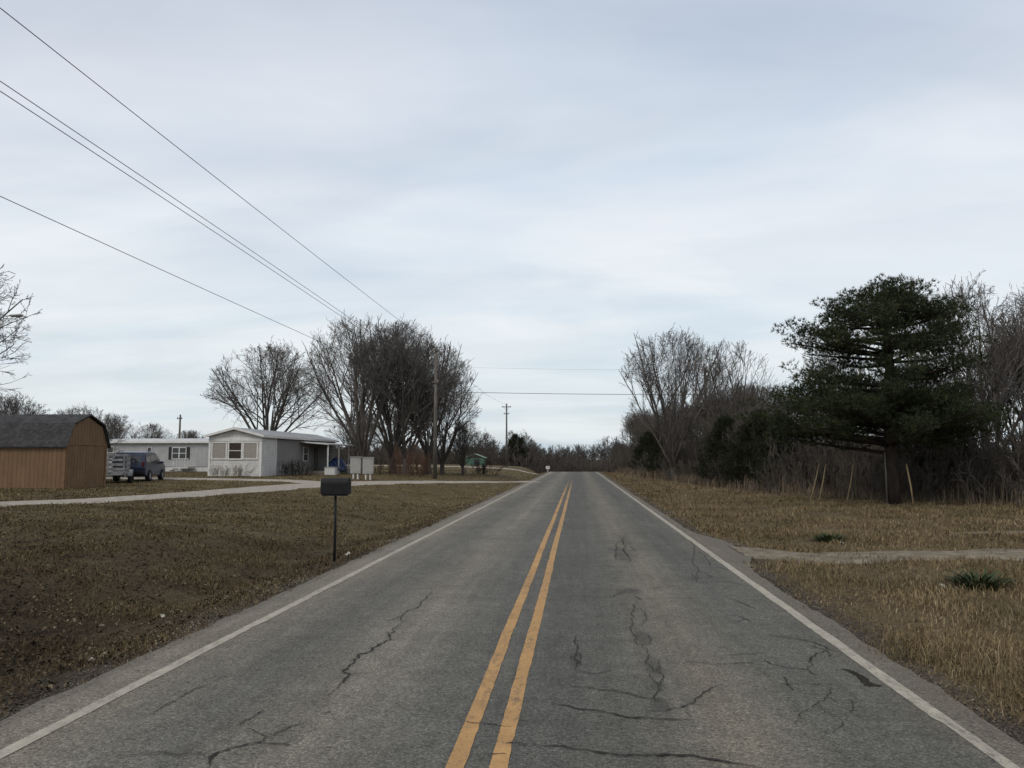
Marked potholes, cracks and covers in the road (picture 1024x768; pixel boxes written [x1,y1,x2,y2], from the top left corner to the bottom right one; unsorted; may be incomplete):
crack [467,721,753,766]
crack [551,585,725,720]
pothole [841,669,881,687]
crack [133,710,302,766]
crack [328,568,465,695]
crack [691,541,756,621]
crack [687,635,873,732]
